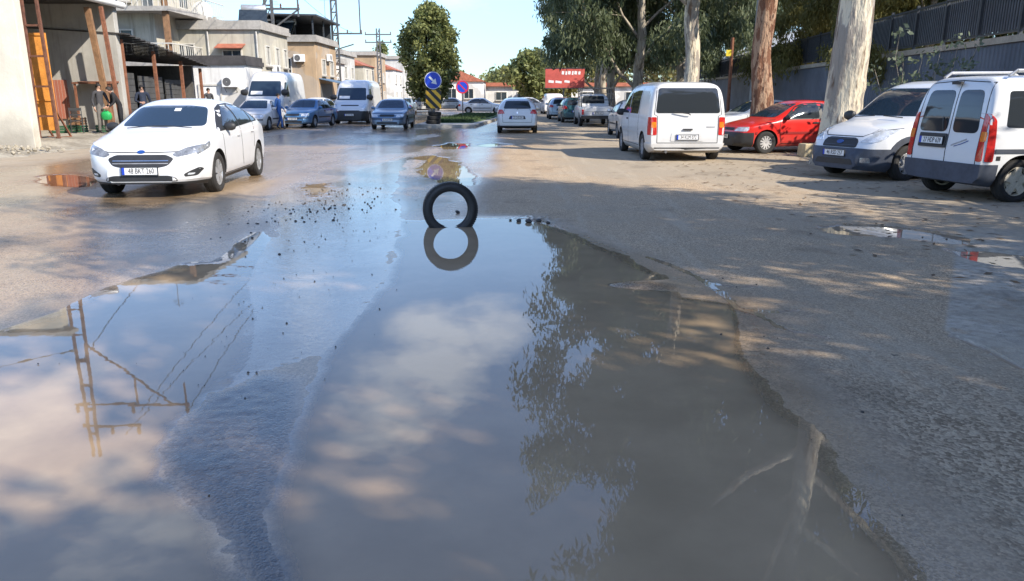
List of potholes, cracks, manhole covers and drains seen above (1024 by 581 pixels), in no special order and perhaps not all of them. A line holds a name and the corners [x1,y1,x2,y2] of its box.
pothole [816,223,975,244]
pothole [251,217,932,581]
pothole [948,248,1024,256]
